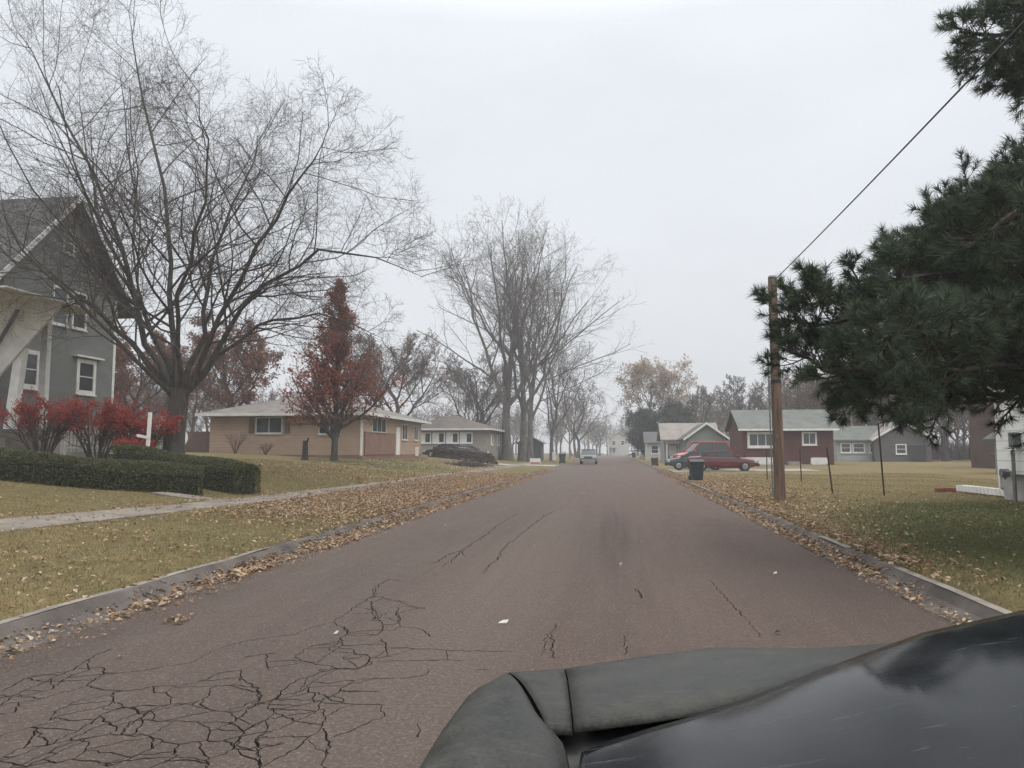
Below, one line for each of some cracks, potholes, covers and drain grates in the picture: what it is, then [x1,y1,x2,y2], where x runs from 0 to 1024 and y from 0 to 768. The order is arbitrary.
crack [711,581,761,638]
crack [541,624,557,659]
crack [432,505,568,571]
crack [0,579,493,768]
